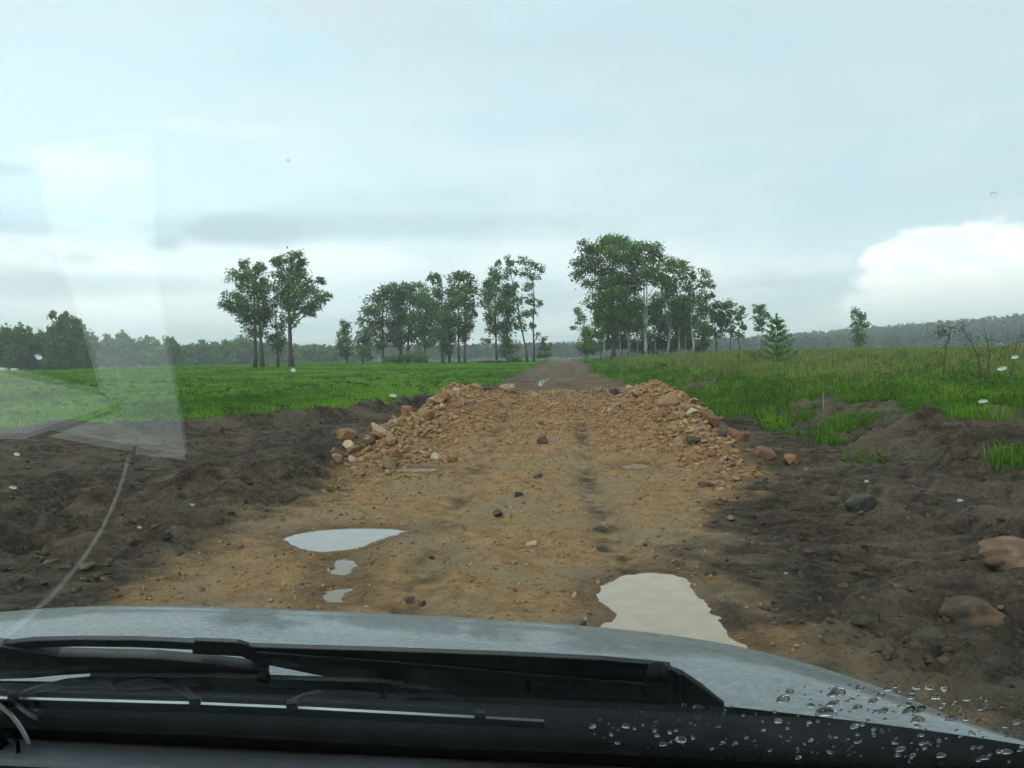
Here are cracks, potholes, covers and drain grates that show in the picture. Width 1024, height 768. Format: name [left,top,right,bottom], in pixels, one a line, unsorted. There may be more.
pothole [268,524,421,557]
pothole [578,567,775,653]
